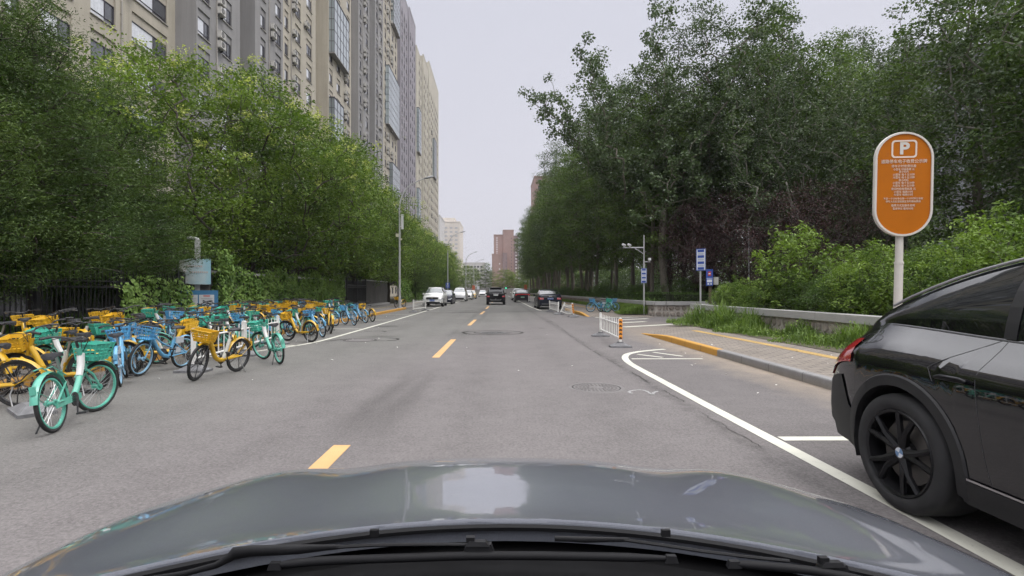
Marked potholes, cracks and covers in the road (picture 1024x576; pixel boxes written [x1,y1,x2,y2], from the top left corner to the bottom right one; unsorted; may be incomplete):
manhole cover [568,382,625,393]
